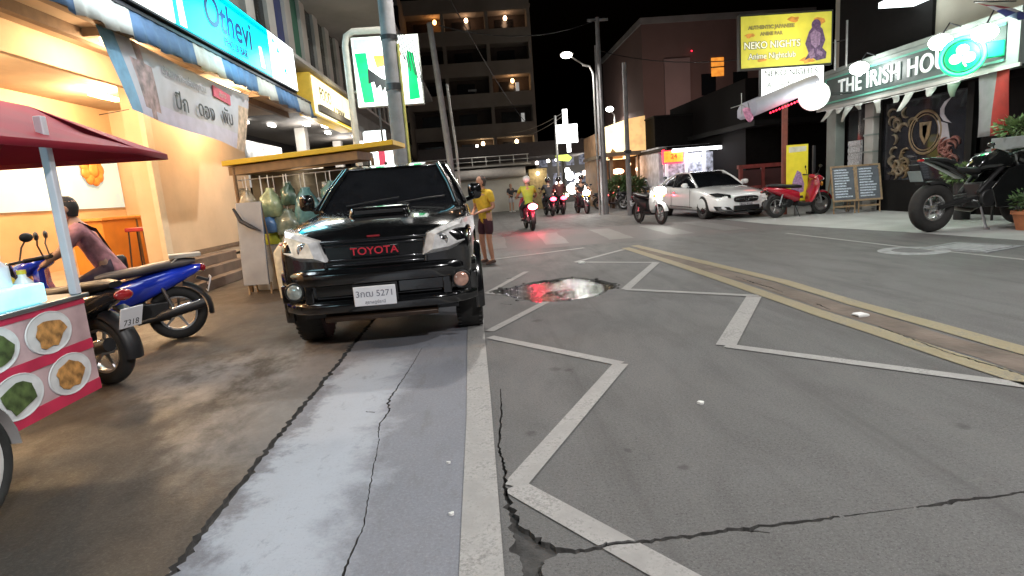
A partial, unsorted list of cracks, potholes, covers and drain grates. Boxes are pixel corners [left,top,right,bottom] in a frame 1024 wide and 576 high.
crack [165,319,421,576]
crack [497,389,1024,576]
pothole [489,276,620,302]
